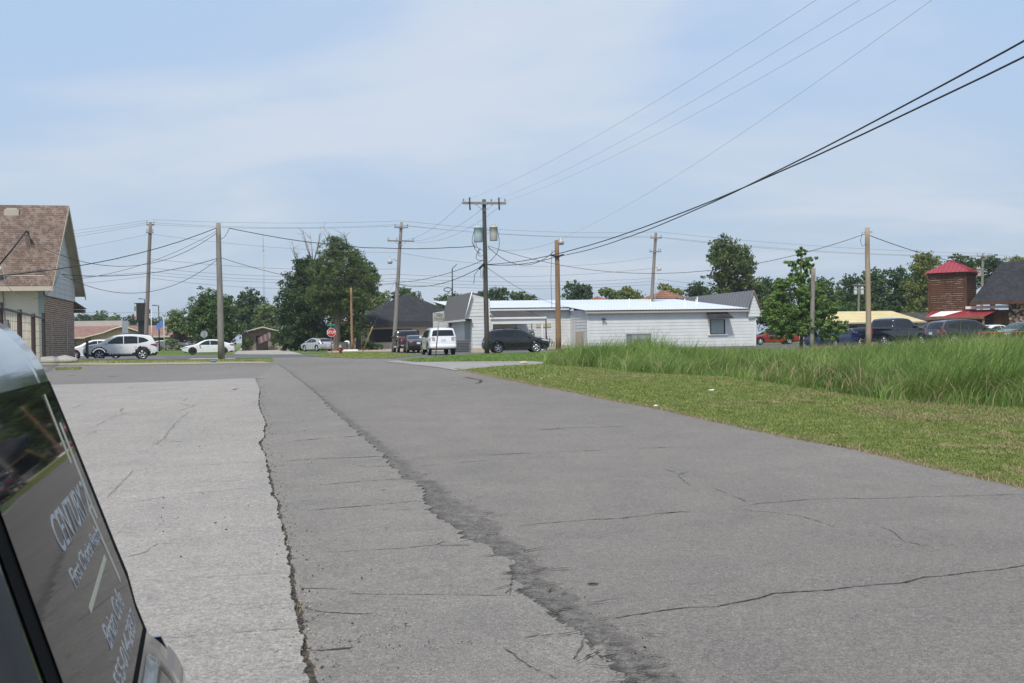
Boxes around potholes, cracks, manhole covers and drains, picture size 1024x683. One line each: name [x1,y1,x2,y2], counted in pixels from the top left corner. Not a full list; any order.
crack [129,398,195,446]
crack [182,363,1024,683]
